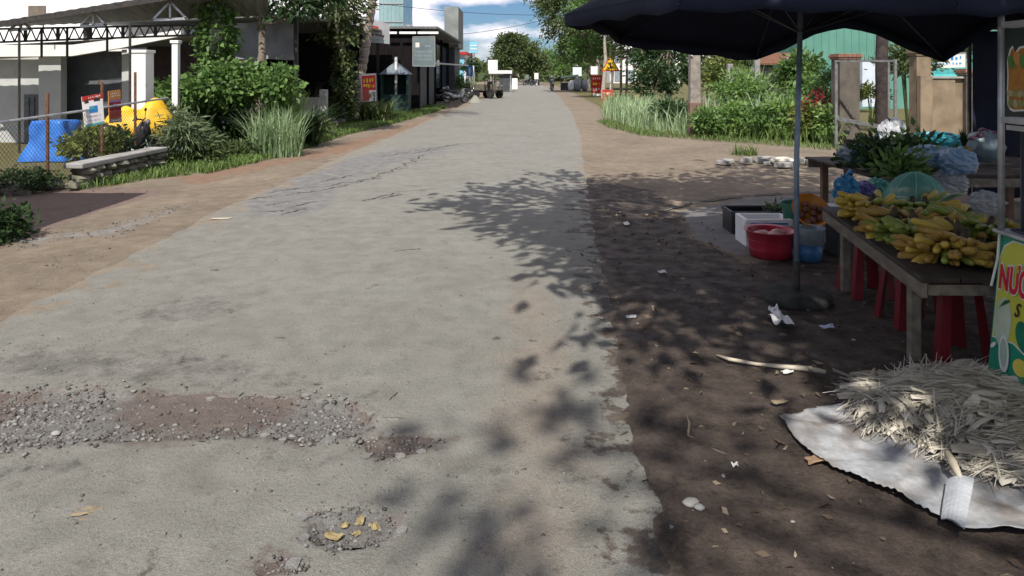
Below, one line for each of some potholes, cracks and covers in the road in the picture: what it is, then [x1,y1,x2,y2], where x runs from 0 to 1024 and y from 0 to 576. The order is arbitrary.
crack [241,142,494,215]
pothole [287,501,411,555]
pothole [0,379,378,458]
pothole [345,430,445,461]
pothole [250,554,321,576]
